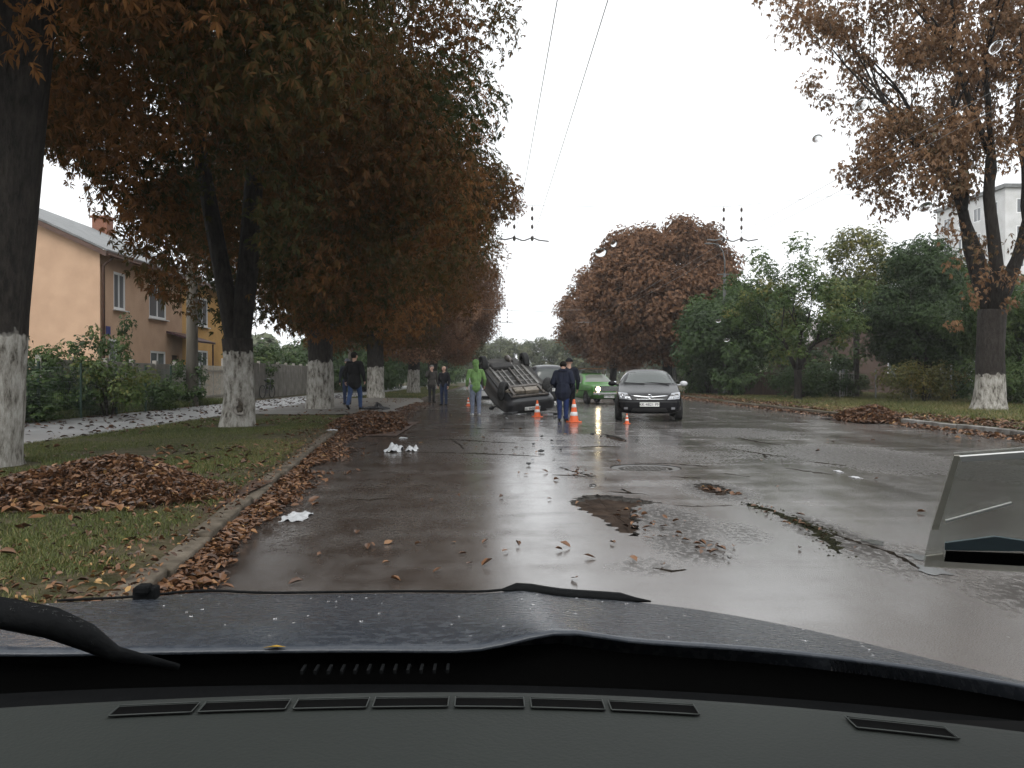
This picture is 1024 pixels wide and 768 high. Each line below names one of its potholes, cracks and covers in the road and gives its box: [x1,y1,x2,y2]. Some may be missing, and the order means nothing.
crack [674,501,930,576]
pothole [694,483,735,495]
pothole [568,494,663,536]
